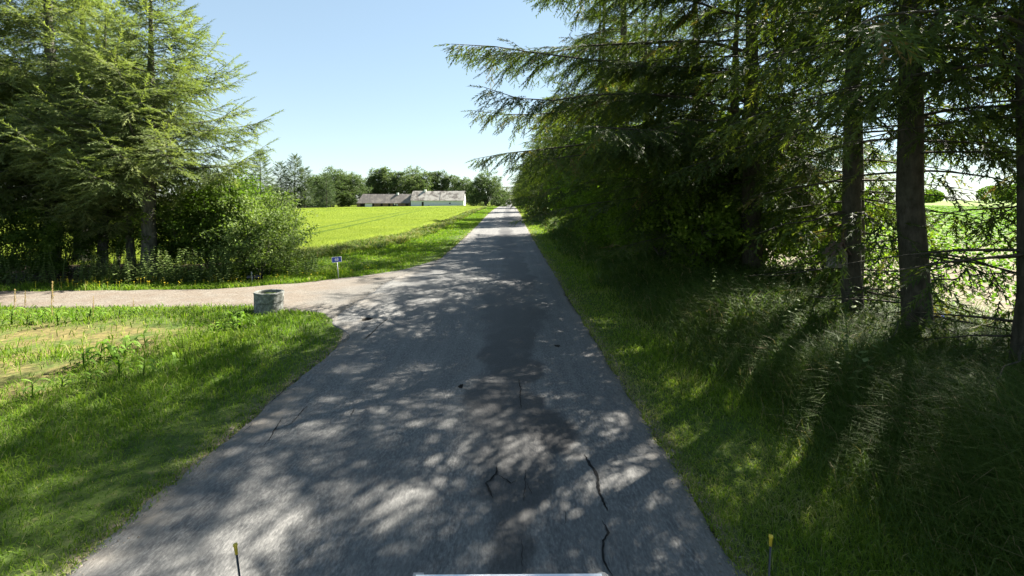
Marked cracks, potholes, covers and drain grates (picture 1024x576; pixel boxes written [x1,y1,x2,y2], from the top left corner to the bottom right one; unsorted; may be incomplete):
crack [584,454,613,576]
crack [242,375,307,445]
crack [485,466,532,500]
